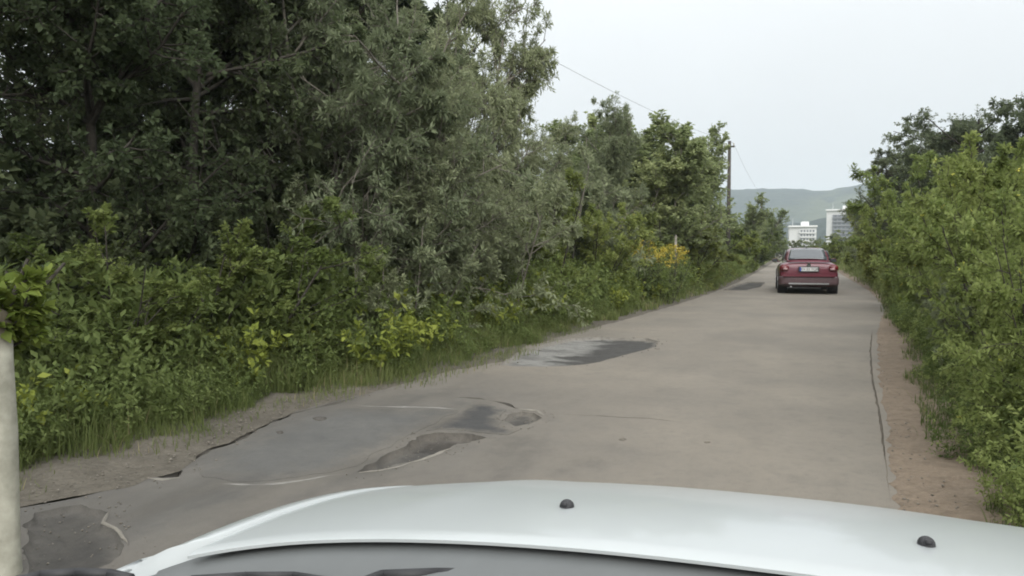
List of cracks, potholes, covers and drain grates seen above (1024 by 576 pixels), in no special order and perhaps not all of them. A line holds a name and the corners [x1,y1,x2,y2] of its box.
pothole [494,409,554,429]
pothole [346,427,496,478]
